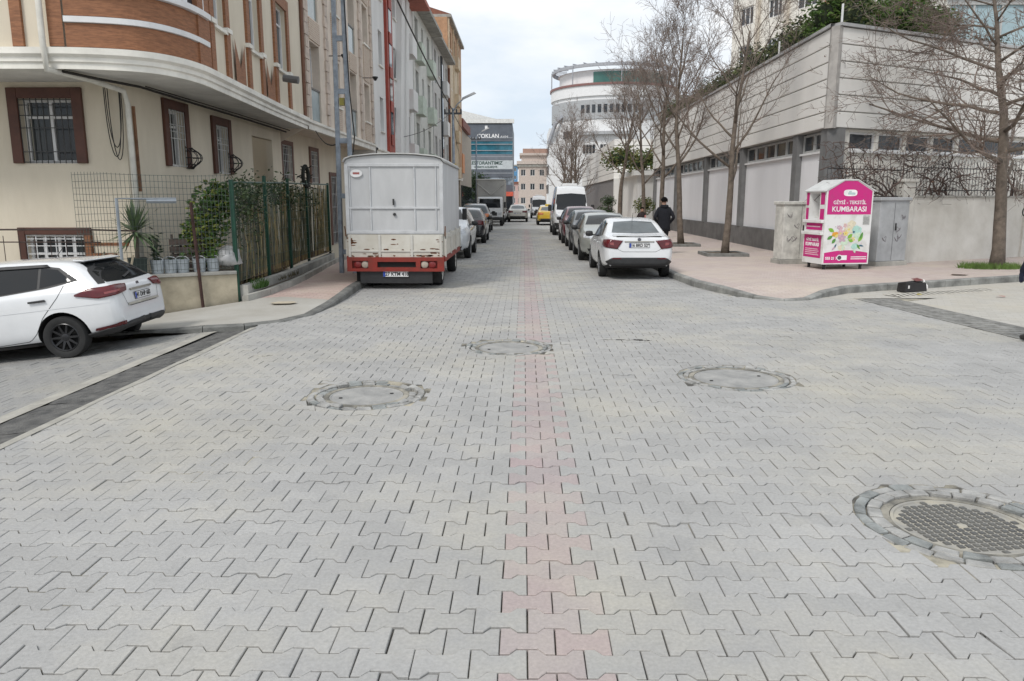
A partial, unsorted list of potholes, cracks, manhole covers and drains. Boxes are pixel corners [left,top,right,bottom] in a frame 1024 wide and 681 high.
manhole cover [678,364,797,392]
manhole cover [306,381,425,410]
manhole cover [466,339,551,356]
manhole cover [854,484,1024,572]
